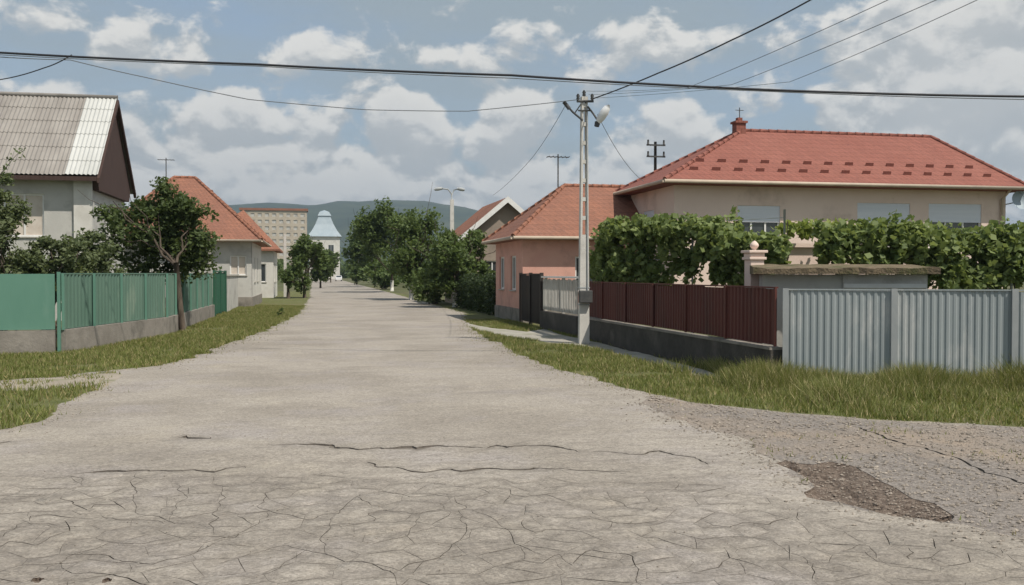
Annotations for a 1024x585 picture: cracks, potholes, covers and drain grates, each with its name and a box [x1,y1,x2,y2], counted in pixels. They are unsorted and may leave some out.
crack [860,427,1024,484]
crack [282,443,707,473]
pothole [776,460,954,522]
crack [0,466,1024,585]
